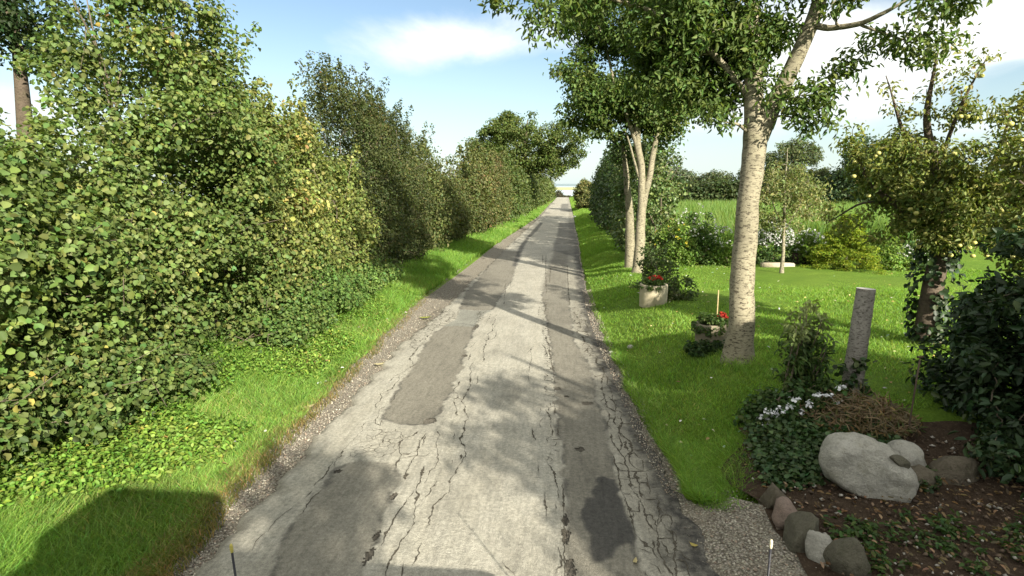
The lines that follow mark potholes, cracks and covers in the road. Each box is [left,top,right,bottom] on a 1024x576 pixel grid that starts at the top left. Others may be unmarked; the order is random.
crack [527,299,559,514]
crack [573,307,691,576]
crack [252,282,511,576]
